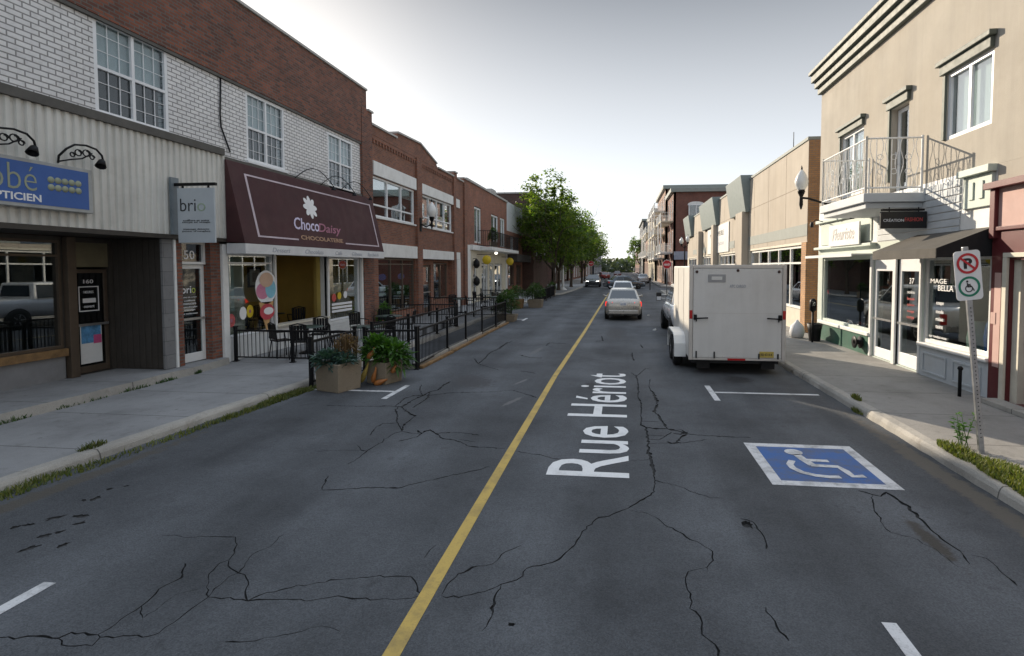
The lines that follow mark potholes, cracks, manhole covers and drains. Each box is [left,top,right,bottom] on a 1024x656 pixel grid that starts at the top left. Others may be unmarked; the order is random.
crack [0,535,420,647]
crack [425,368,751,656]
crack [322,466,489,490]
crack [765,608,789,641]
crack [327,382,536,464]
